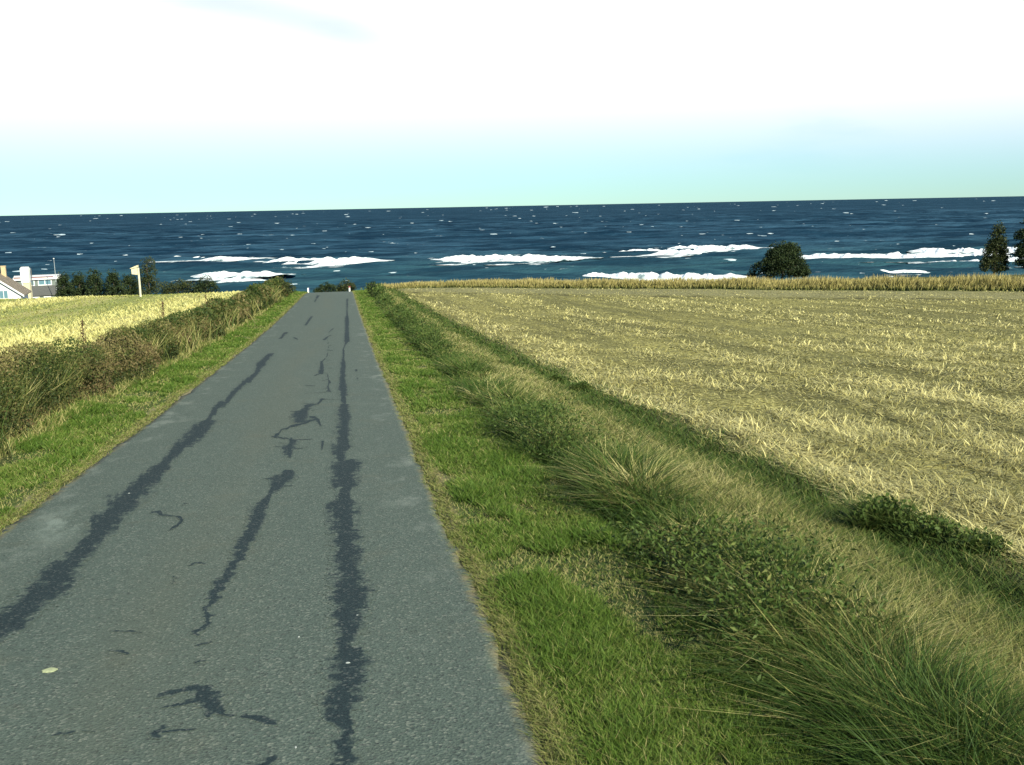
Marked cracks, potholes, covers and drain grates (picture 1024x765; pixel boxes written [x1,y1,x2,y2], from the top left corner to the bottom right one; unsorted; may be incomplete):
crack [0,295,378,765]
